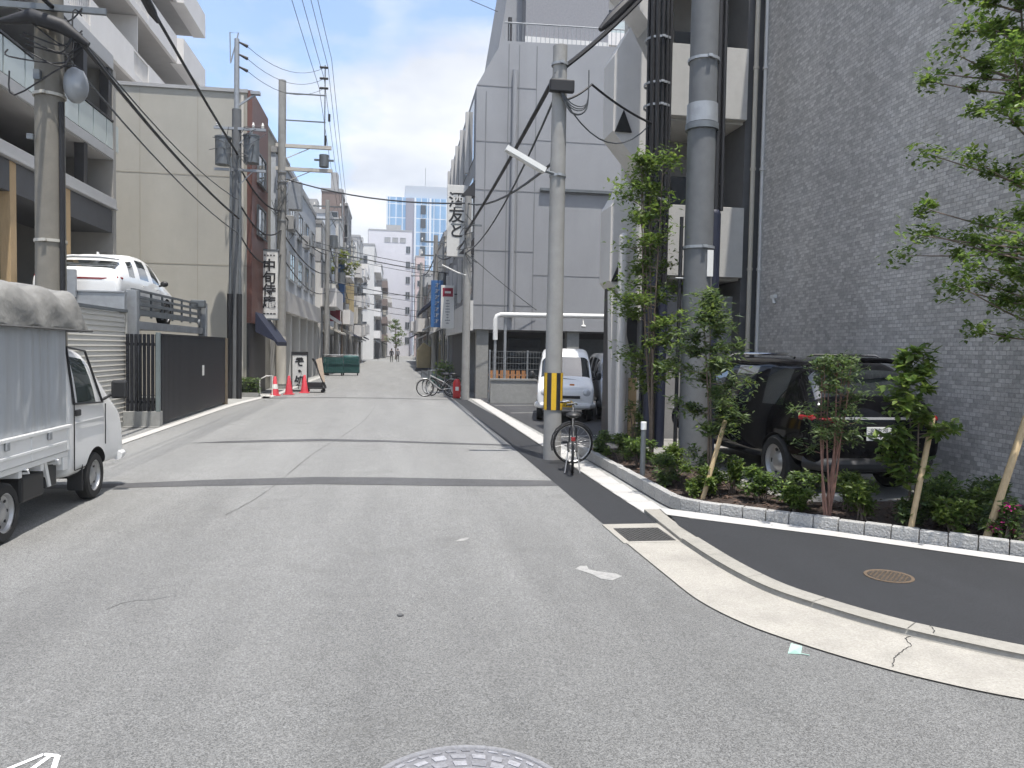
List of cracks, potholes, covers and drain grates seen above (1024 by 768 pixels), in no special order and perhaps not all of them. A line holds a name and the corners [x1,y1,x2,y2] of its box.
drain grate [602,523,681,544]
manhole cover [382,745,553,768]
manhole cover [863,569,915,583]
